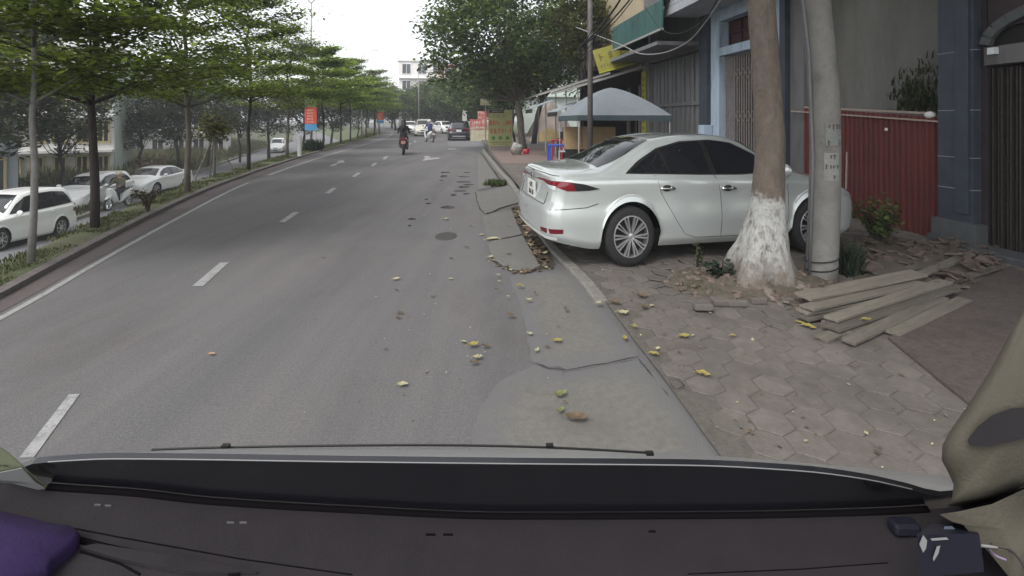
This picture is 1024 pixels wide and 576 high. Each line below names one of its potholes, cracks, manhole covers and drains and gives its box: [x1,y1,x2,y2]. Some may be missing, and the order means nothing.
manhole cover [435,232,457,241]
crack [474,152,501,214]
crack [539,357,685,394]
